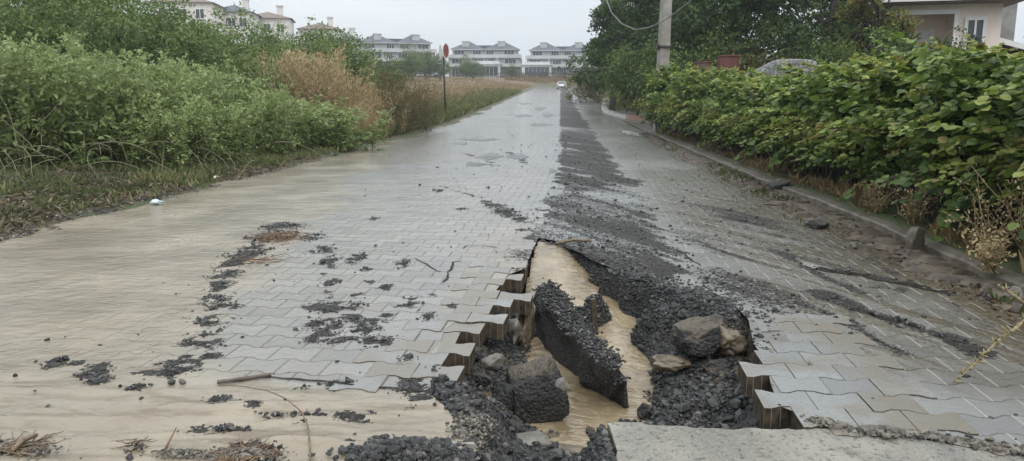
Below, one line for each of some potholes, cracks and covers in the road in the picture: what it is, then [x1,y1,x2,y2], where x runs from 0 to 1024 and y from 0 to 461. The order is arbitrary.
crack [854,310,920,329]
crack [415,245,494,283]
pothole [433,239,790,461]
crack [806,266,957,294]
